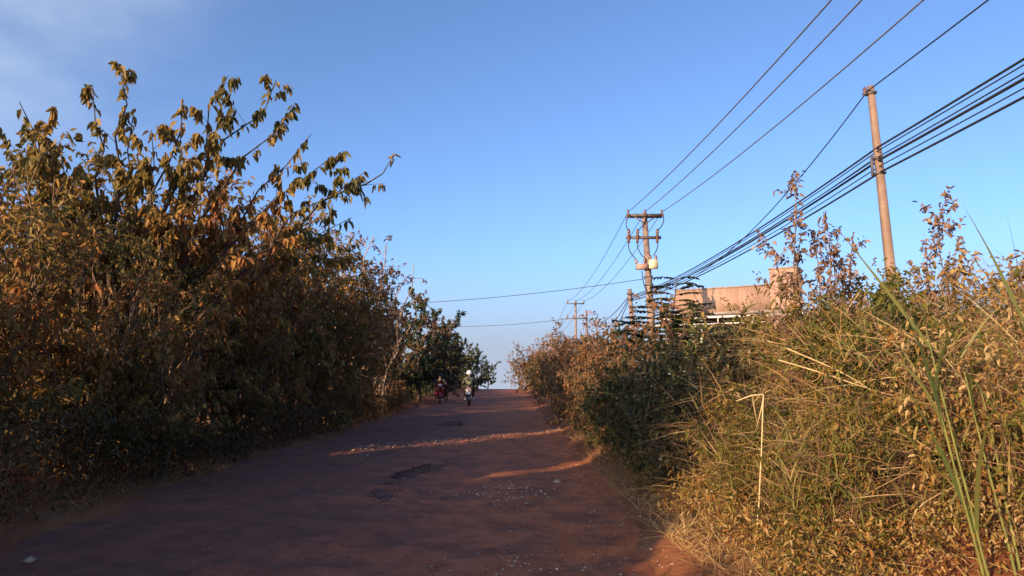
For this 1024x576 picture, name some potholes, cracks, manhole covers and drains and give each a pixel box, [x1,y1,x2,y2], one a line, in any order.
pothole [389,462,450,480]
pothole [365,488,404,502]
